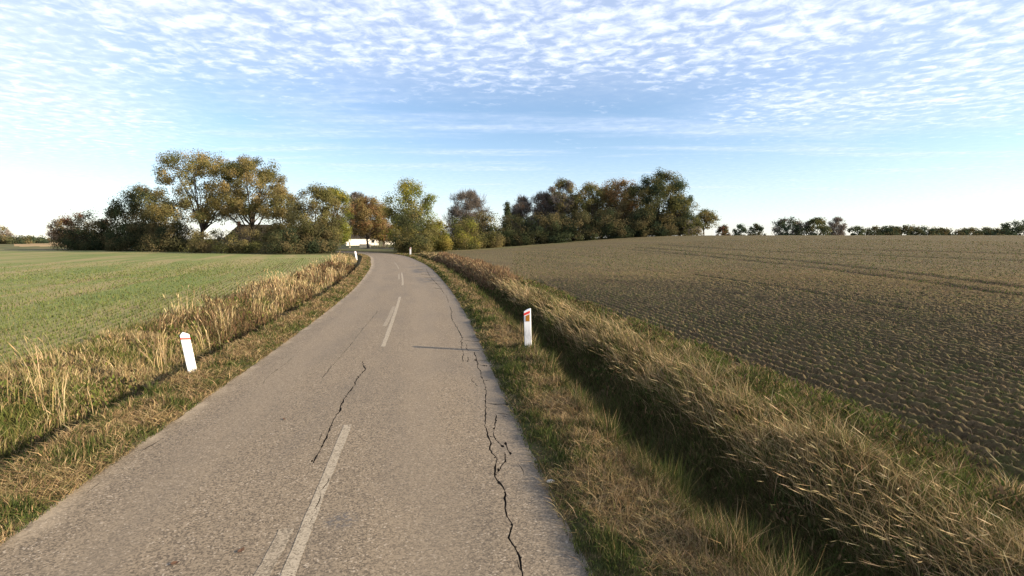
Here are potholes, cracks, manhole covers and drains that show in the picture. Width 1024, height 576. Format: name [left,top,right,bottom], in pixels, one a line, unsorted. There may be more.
crack [310,362,366,522]
crack [450,308,524,576]
